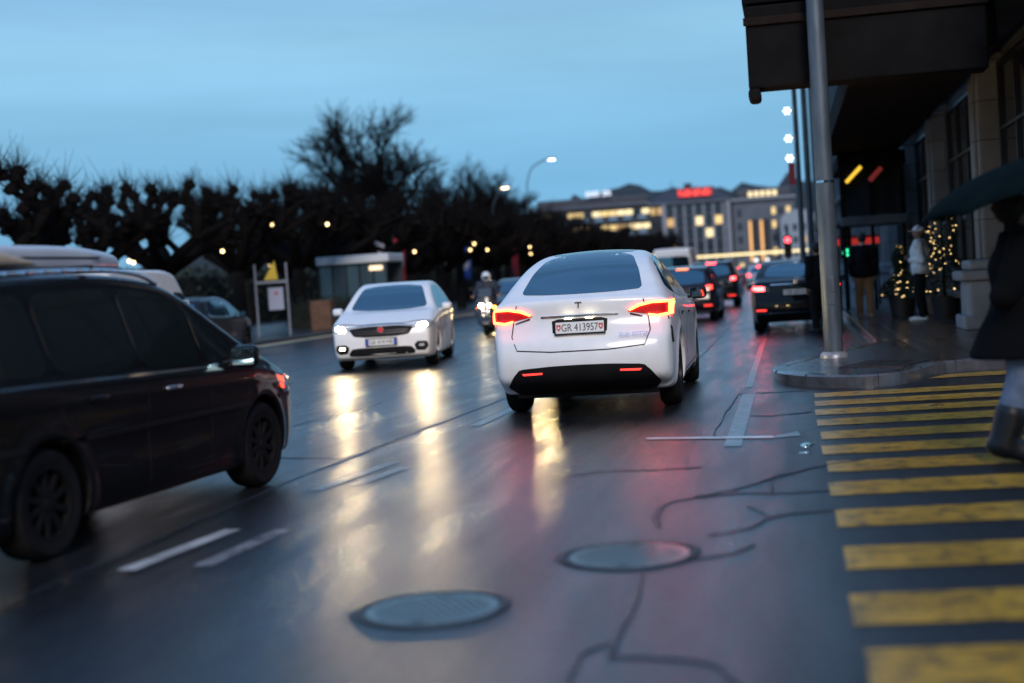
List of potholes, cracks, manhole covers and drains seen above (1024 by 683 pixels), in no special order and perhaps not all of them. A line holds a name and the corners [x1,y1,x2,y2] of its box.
manhole cover [554,541,702,571]
manhole cover [347,590,513,630]
